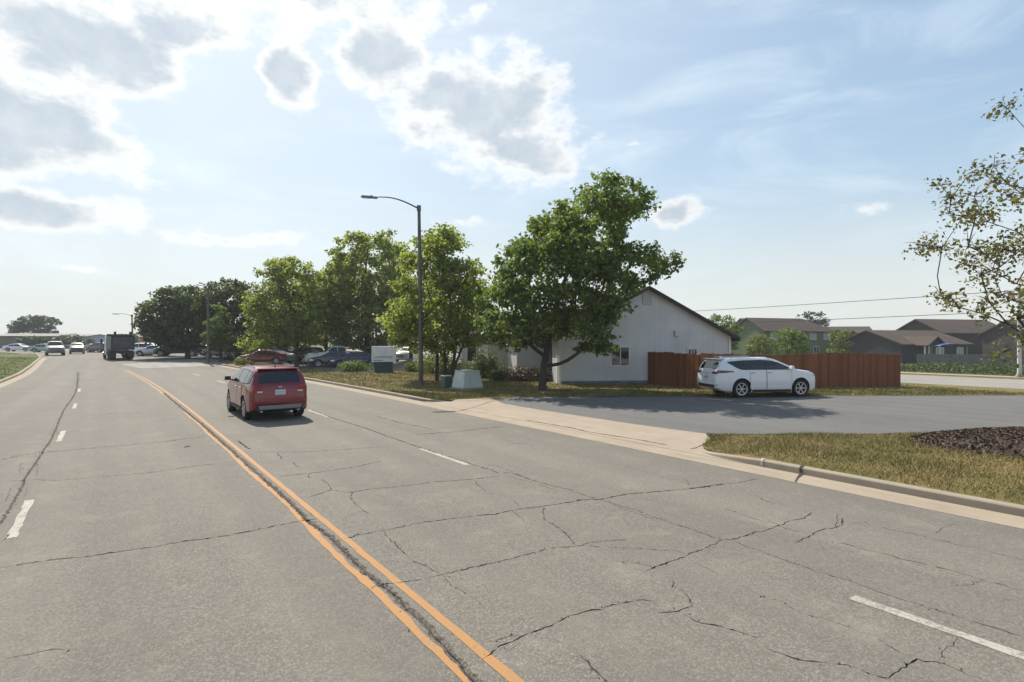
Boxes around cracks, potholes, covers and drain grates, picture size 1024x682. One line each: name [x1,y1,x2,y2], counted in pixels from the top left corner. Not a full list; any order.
crack [2,393,1024,682]
